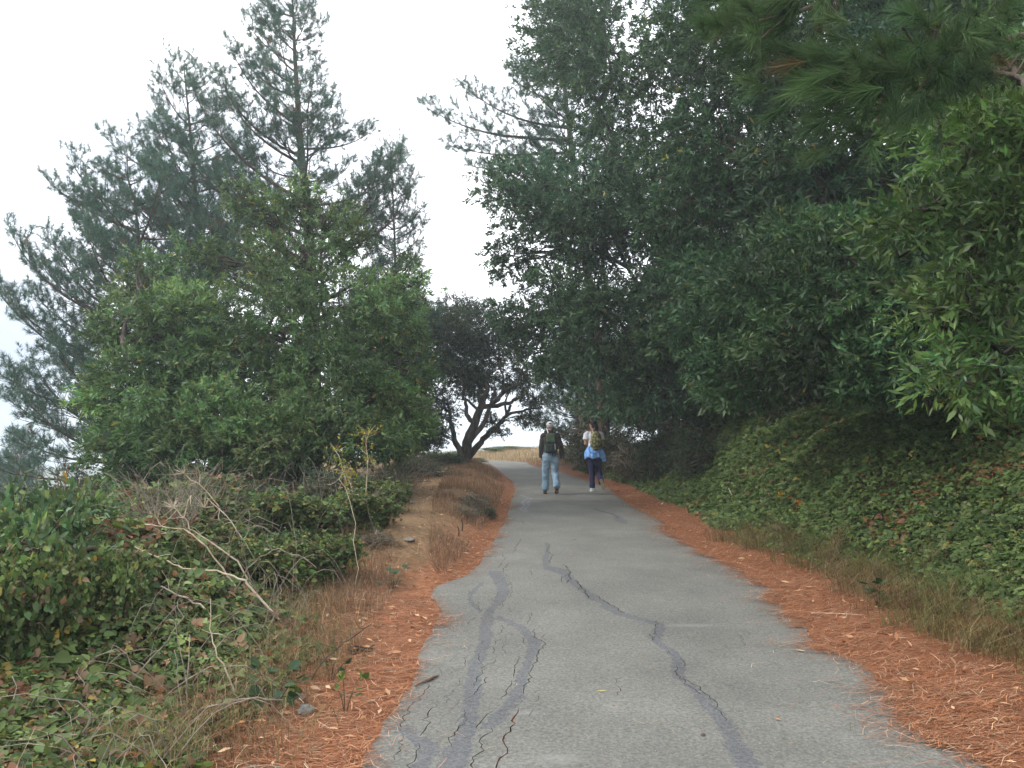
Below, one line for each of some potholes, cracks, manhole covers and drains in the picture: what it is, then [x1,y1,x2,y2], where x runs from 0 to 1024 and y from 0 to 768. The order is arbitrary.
crack [387,520,764,768]
